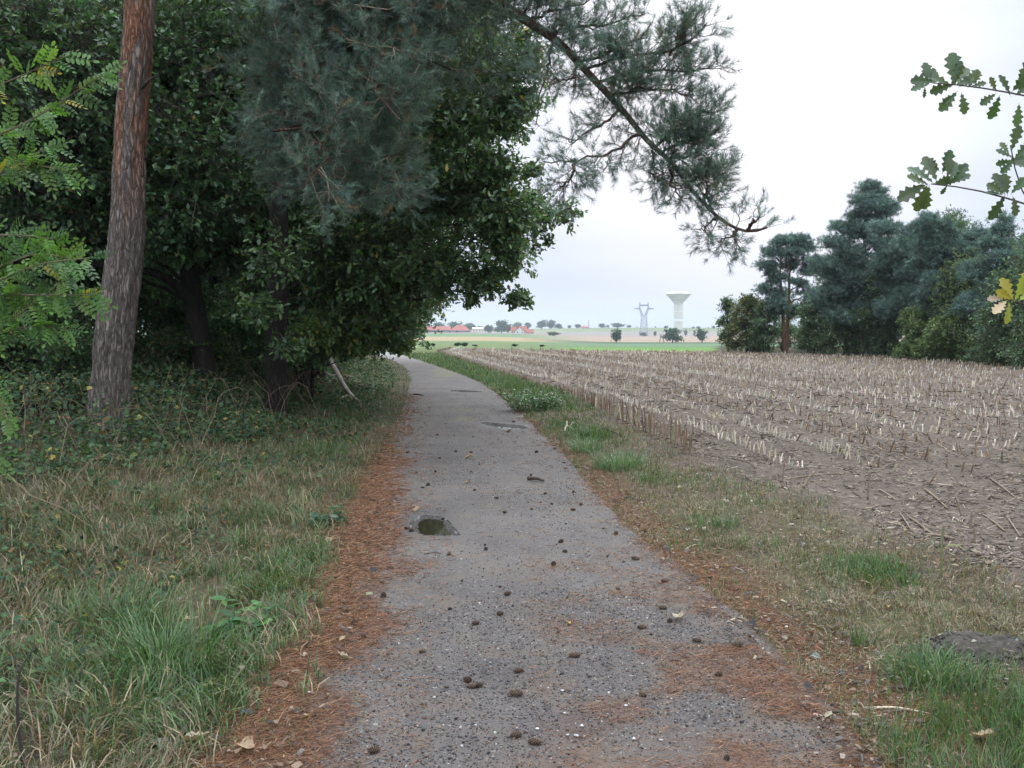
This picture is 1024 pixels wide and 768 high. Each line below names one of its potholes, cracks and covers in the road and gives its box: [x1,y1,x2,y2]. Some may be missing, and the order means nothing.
pothole [409,514,461,536]
